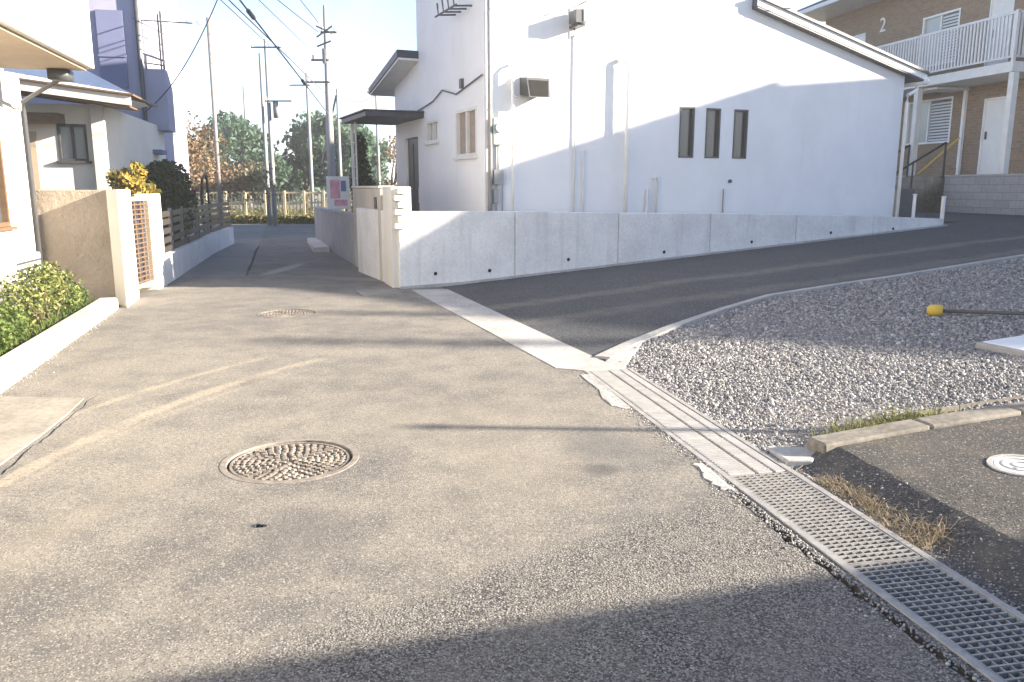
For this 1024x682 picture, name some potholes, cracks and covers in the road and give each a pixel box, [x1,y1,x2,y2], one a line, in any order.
drain grate [730,472,921,565]
manhole cover [219,438,359,484]
utility cover [986,454,1024,477]
drain grate [849,557,1024,682]
manhole cover [256,309,318,318]
